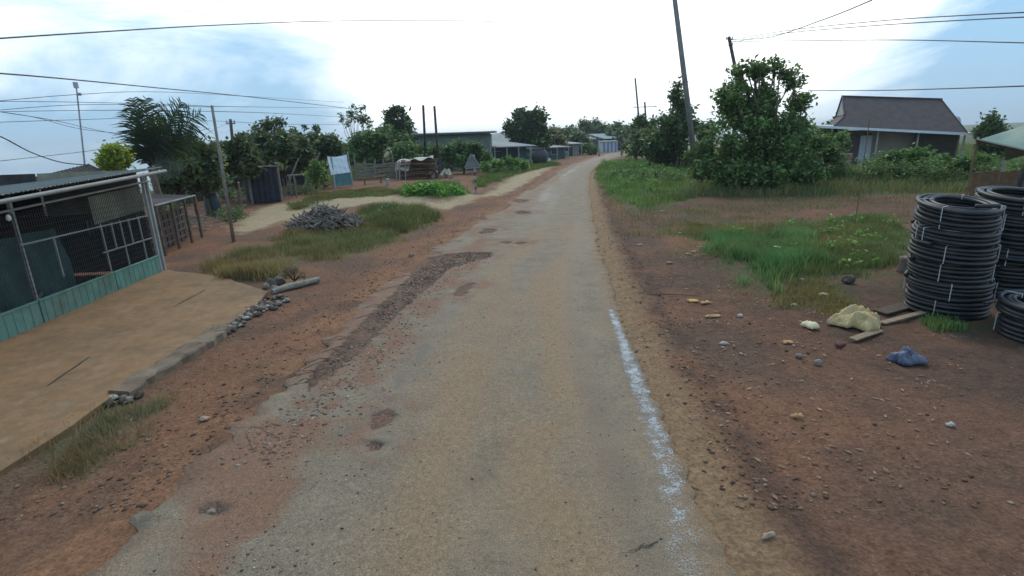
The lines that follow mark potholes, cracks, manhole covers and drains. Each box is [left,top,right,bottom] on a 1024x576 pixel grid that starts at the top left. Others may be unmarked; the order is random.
pothole [364,441,385,452]
crack [621,541,657,553]
pothole [370,409,398,430]
pothole [199,501,225,516]
pothole [305,252,492,392]
